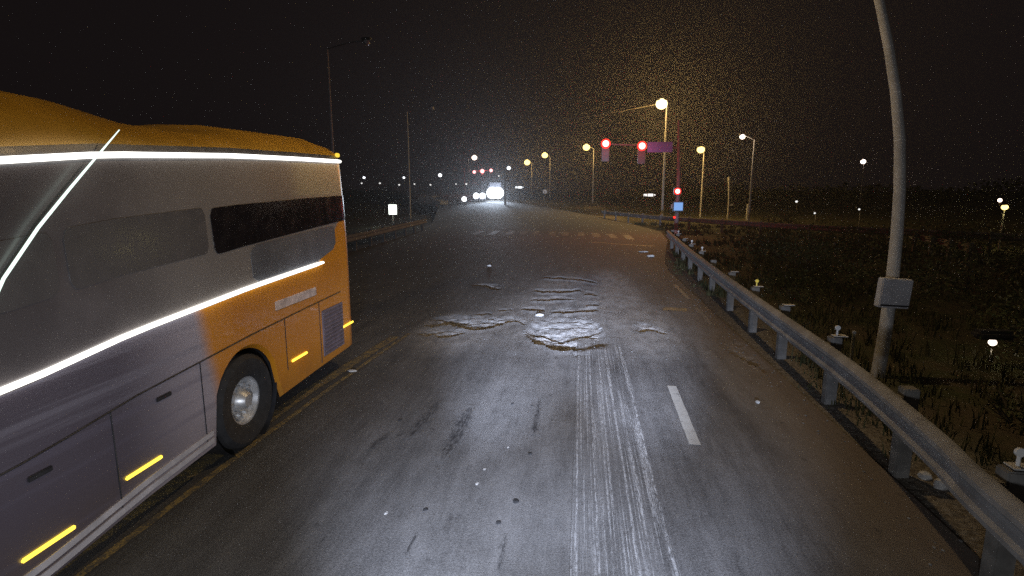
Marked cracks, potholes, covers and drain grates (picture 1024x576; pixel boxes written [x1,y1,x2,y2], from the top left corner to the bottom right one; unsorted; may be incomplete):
pothole [421,314,530,330]
crack [529,398,541,435]
pothole [630,322,672,335]
crack [496,534,507,574]
pothole [523,316,609,352]
pothole [471,282,508,290]
